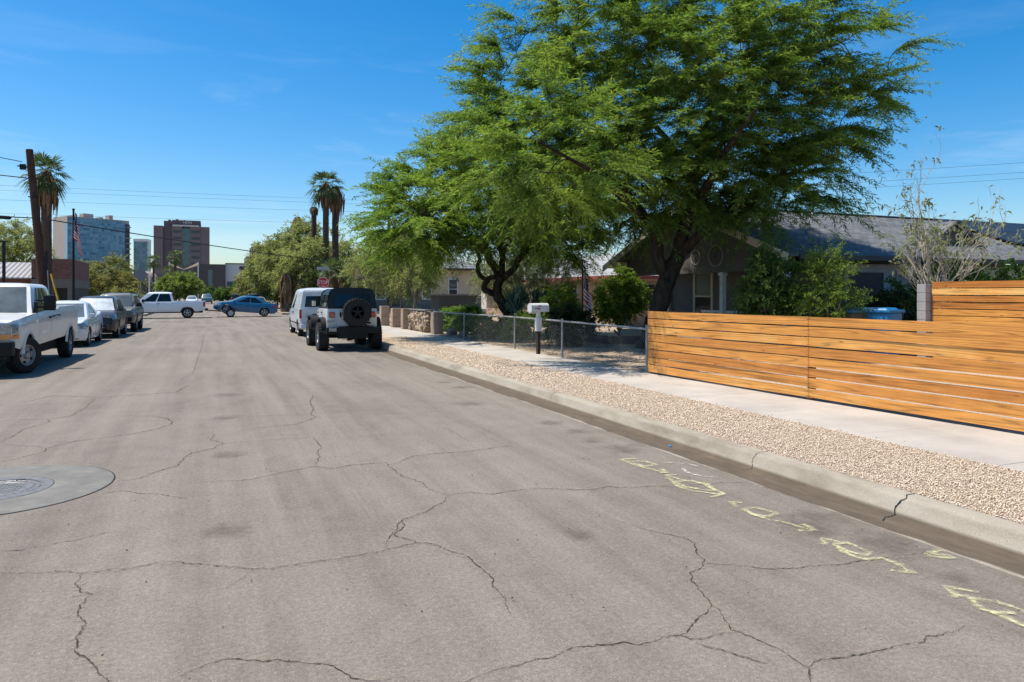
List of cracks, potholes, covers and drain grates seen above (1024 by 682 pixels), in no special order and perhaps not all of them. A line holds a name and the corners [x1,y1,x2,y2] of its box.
manhole cover [0,465,116,515]
crack [2,395,747,682]
crack [463,520,963,682]
